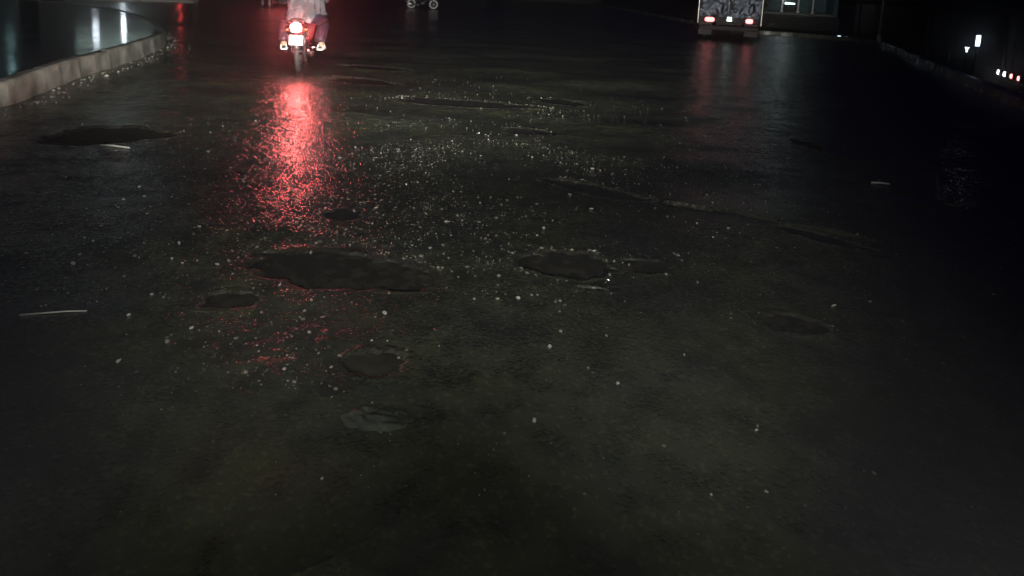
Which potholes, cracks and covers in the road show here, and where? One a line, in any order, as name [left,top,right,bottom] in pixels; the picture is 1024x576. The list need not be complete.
pothole [334,64,415,72]
pothole [228,244,447,294]
pothole [505,247,632,283]
pothole [602,255,682,276]
pothole [189,287,268,313]
pothole [313,205,369,224]
pothole [27,124,193,148]
pothole [497,126,554,134]
pothole [754,307,839,340]
pothole [525,97,595,107]
pothole [390,96,548,110]
